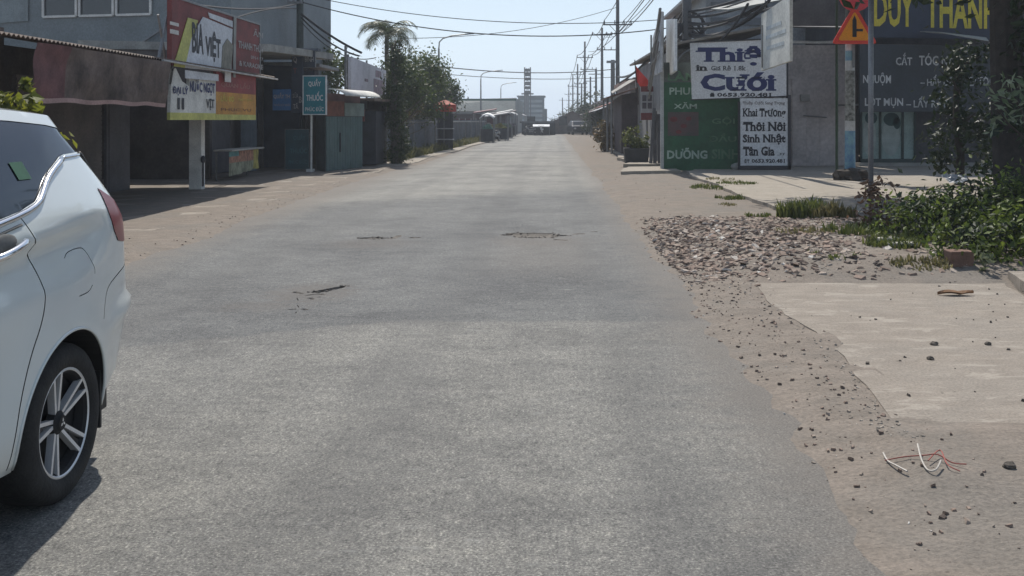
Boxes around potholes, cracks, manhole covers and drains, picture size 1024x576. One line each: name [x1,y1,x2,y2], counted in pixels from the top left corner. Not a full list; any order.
crack [287,292,325,313]
